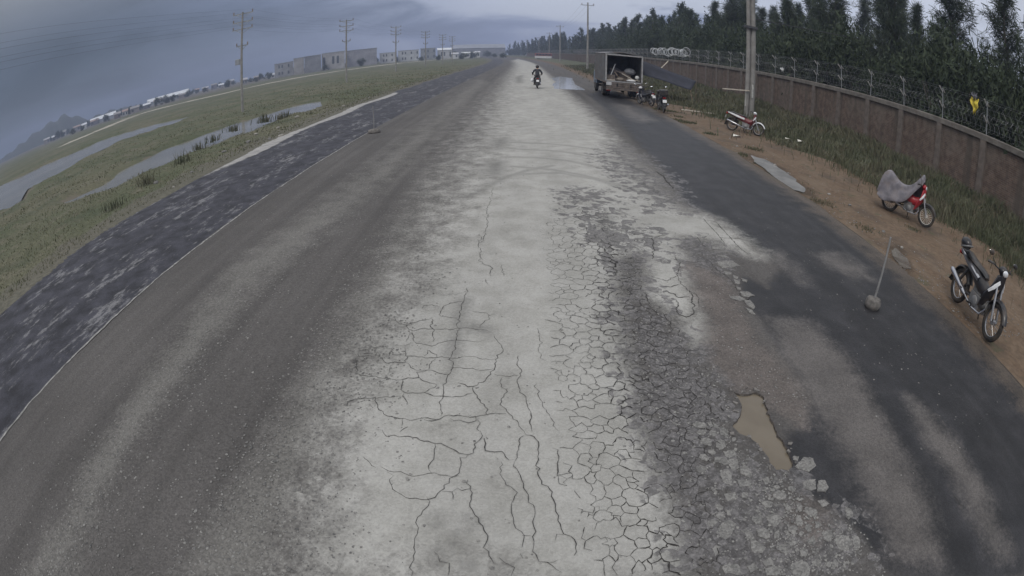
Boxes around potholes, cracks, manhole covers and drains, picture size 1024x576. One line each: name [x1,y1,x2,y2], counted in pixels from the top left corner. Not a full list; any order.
crack [346,288,577,576]
pothole [722,387,796,472]
crack [544,199,860,576]
